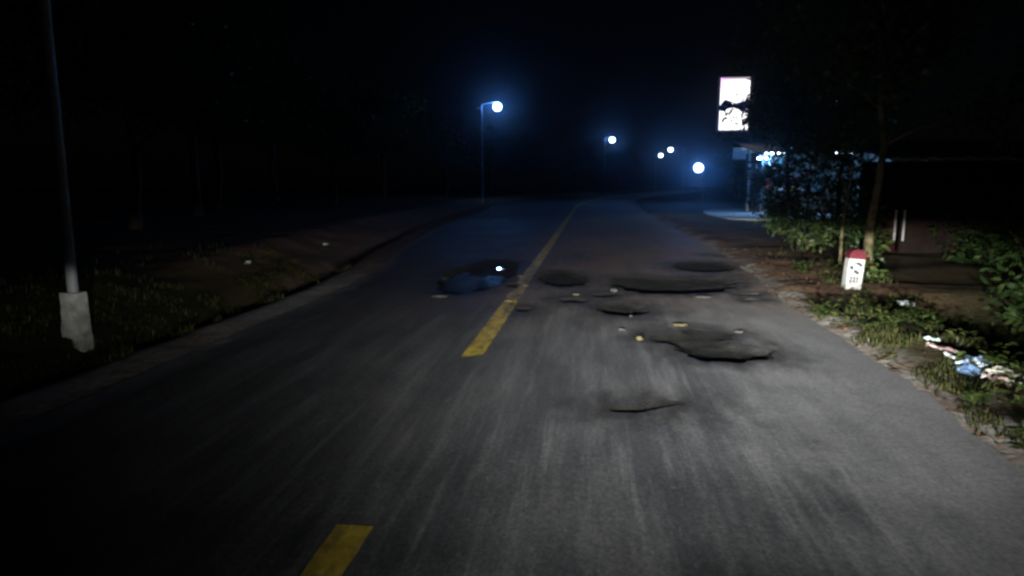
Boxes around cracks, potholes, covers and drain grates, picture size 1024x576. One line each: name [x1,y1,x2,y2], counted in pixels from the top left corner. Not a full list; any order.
pothole [648,329,776,363]
pothole [609,400,685,413]
pothole [537,271,589,287]
pothole [610,276,743,294]
pothole [435,260,522,295]
pothole [596,302,650,316]
pothole [671,262,738,272]
